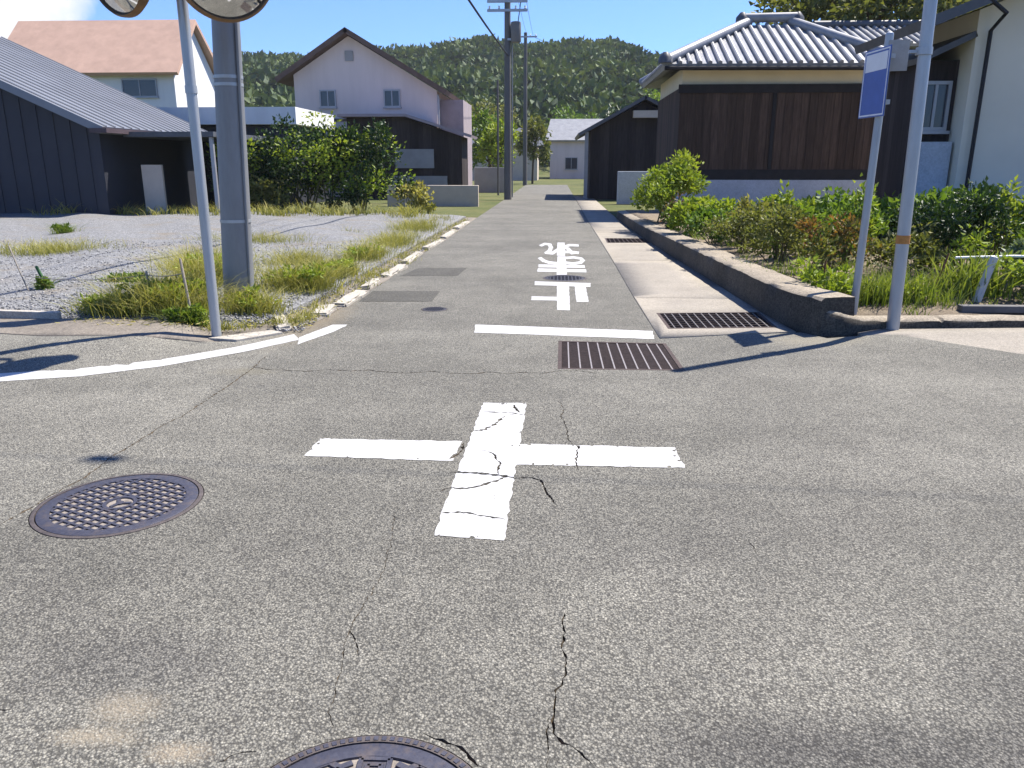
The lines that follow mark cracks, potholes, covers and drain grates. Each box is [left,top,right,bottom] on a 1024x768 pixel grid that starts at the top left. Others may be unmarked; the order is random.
manhole cover [29,473,204,539]
drain grate [657,312,778,329]
crack [437,405,557,518]
drain grate [558,341,685,373]
crack [423,733,485,768]
manhole cover [272,735,471,768]
crack [555,402,580,468]
crack [328,512,396,726]
crack [546,613,592,767]
